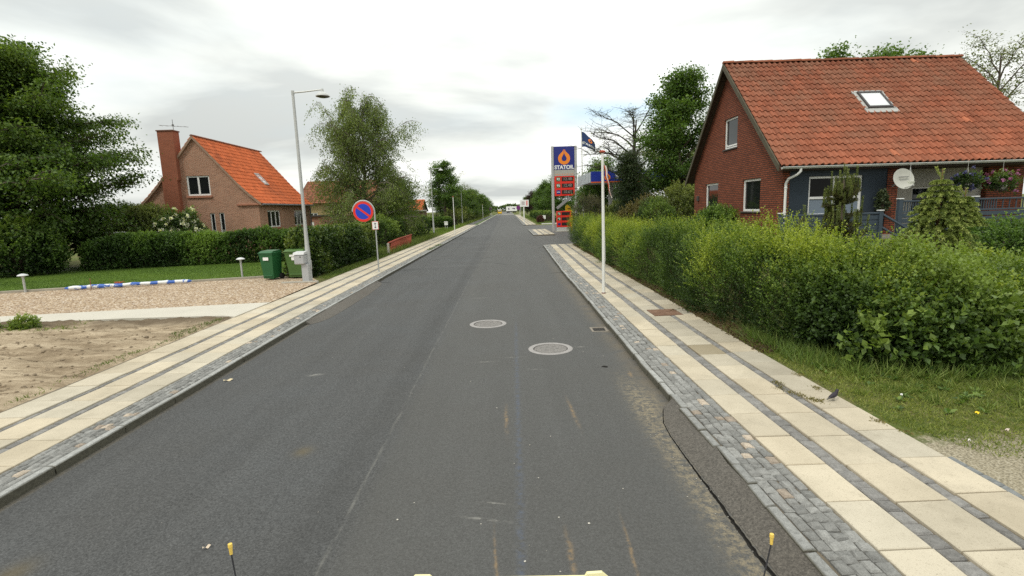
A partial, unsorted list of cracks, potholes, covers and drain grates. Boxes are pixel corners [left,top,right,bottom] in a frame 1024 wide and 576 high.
manhole cover [470,320,506,328]
manhole cover [528,343,573,355]
